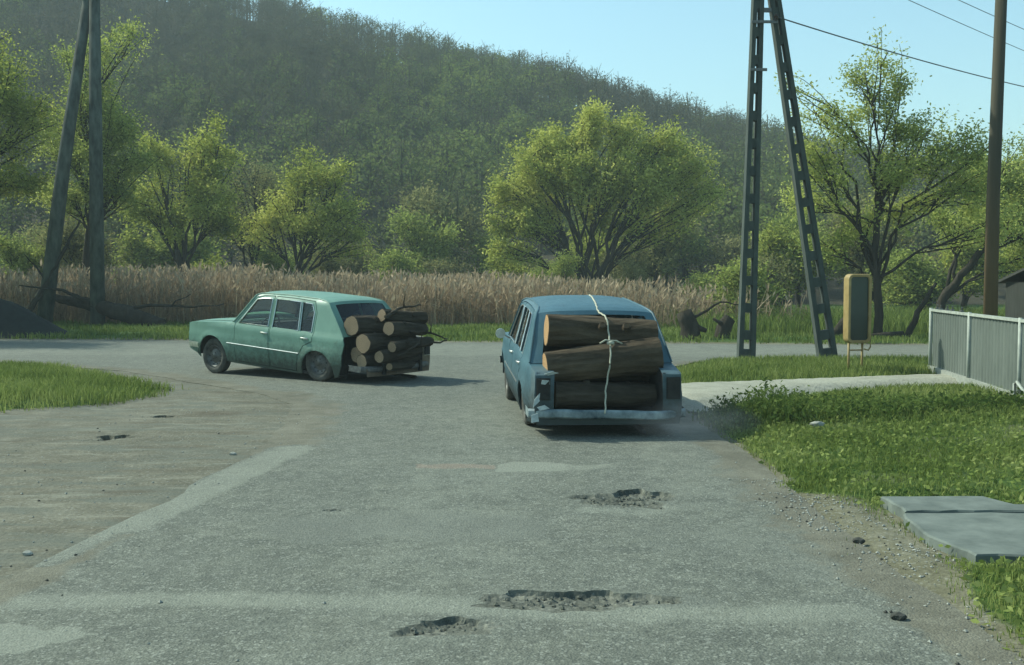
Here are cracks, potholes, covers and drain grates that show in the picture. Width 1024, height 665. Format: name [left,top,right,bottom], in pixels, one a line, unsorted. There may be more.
pothole [470,590,683,613]
pothole [389,616,503,637]
pothole [566,488,675,510]
